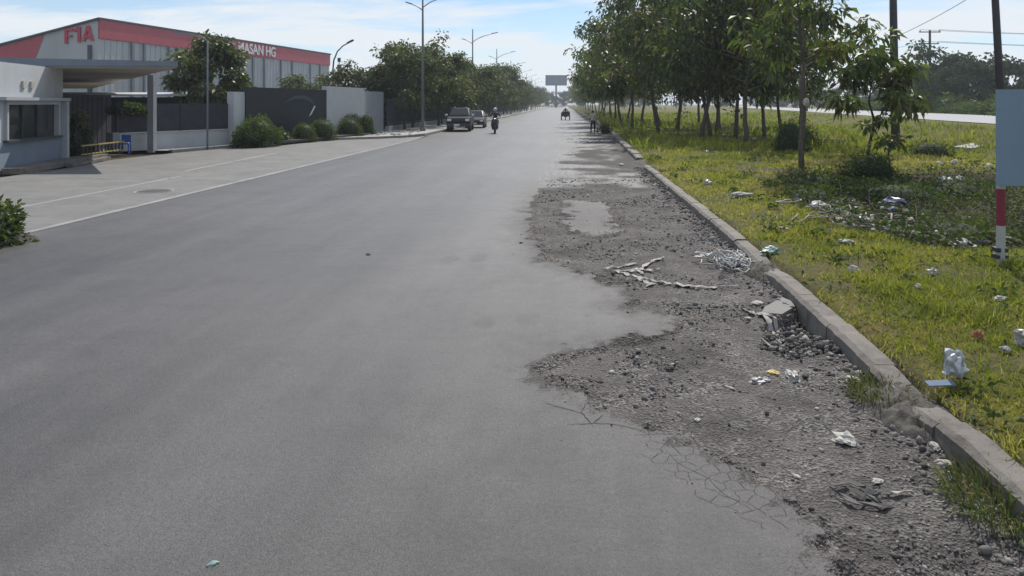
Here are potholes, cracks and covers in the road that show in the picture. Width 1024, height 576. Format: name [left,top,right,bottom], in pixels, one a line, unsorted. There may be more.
pothole [529,317,1024,576]
crack [547,403,799,528]
pothole [525,188,796,326]
